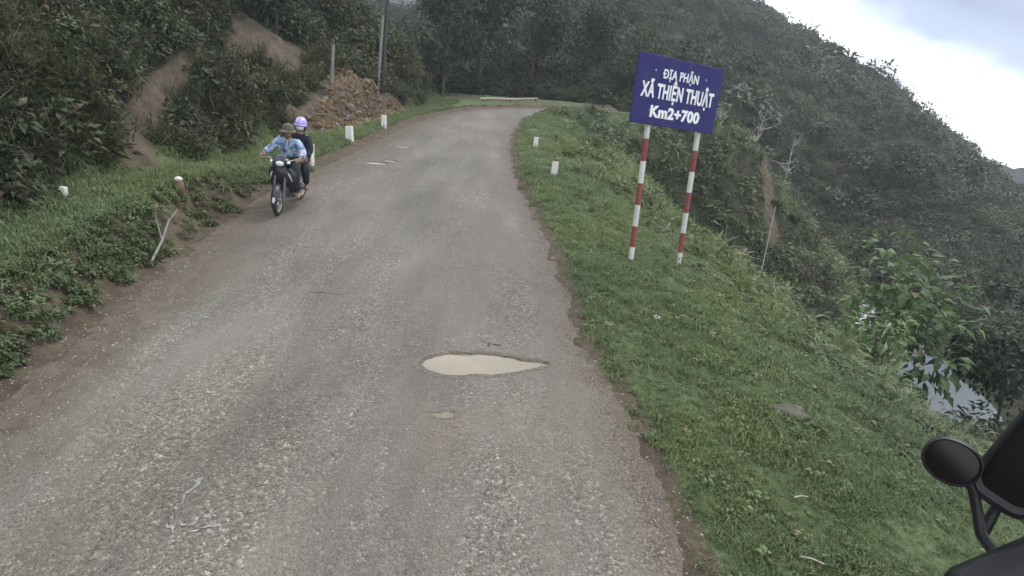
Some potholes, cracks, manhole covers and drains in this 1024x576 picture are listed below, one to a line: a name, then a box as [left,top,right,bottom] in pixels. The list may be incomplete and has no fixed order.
crack [165,476,230,533]
pothole [413,350,554,379]
pothole [429,409,461,419]
